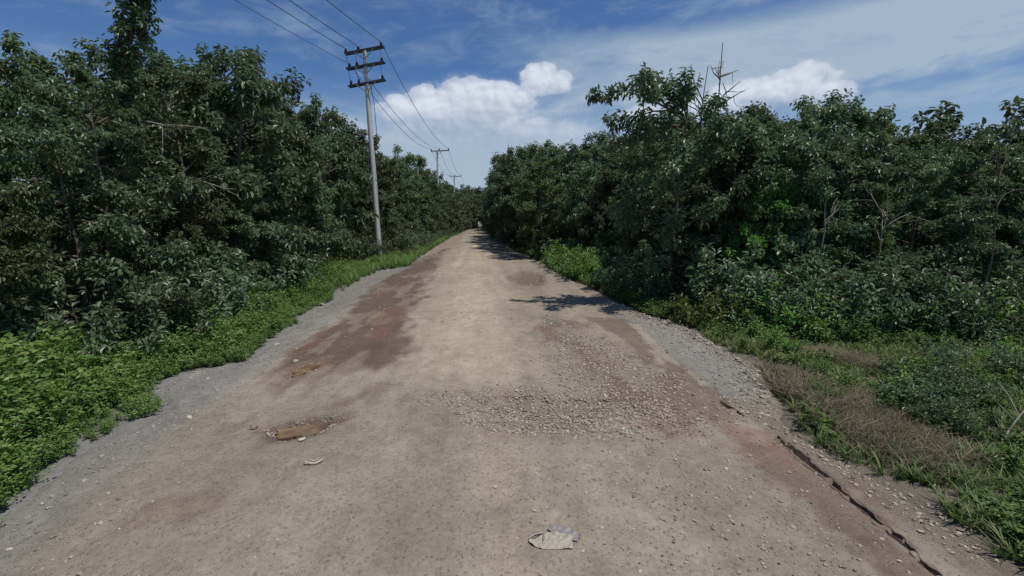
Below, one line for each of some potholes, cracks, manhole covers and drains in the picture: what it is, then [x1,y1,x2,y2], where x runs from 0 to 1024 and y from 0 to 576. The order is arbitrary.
pothole [263,415,354,443]
crack [720,400,745,417]
pothole [279,356,333,381]
crack [774,435,944,576]
